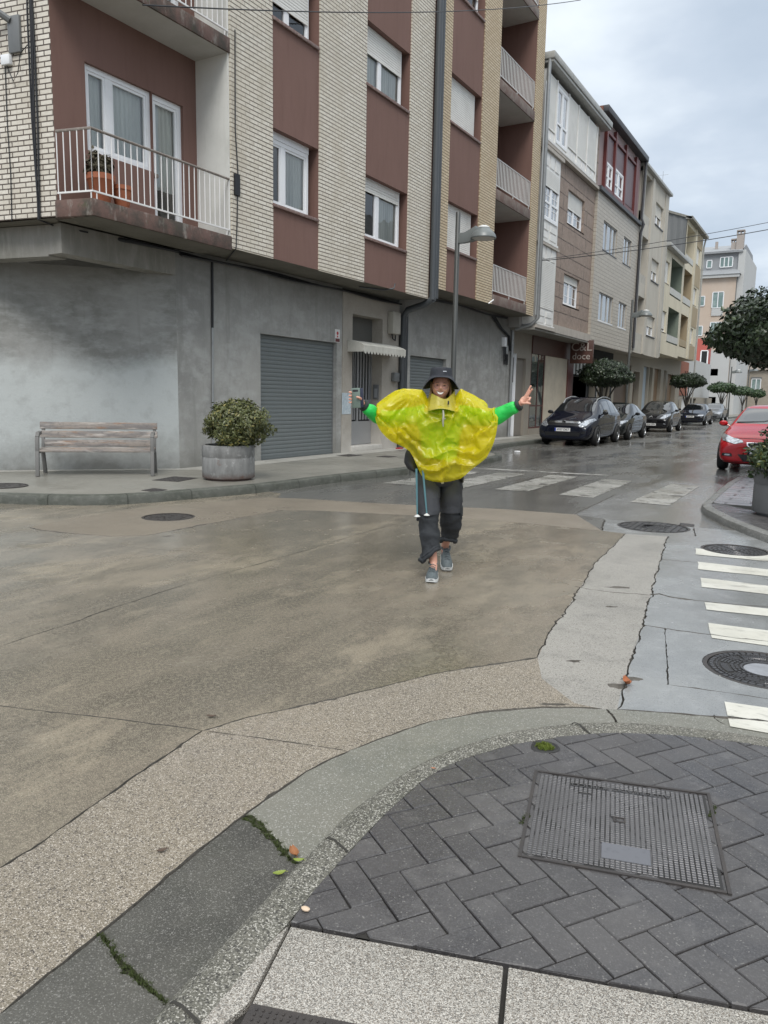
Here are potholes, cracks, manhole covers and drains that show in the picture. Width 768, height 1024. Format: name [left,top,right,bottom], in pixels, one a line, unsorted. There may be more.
manhole cover [702,651,768,689]
manhole cover [617,521,690,533]
utility cover [518,770,732,896]
manhole cover [701,544,768,556]
manhole cover [142,513,195,521]
